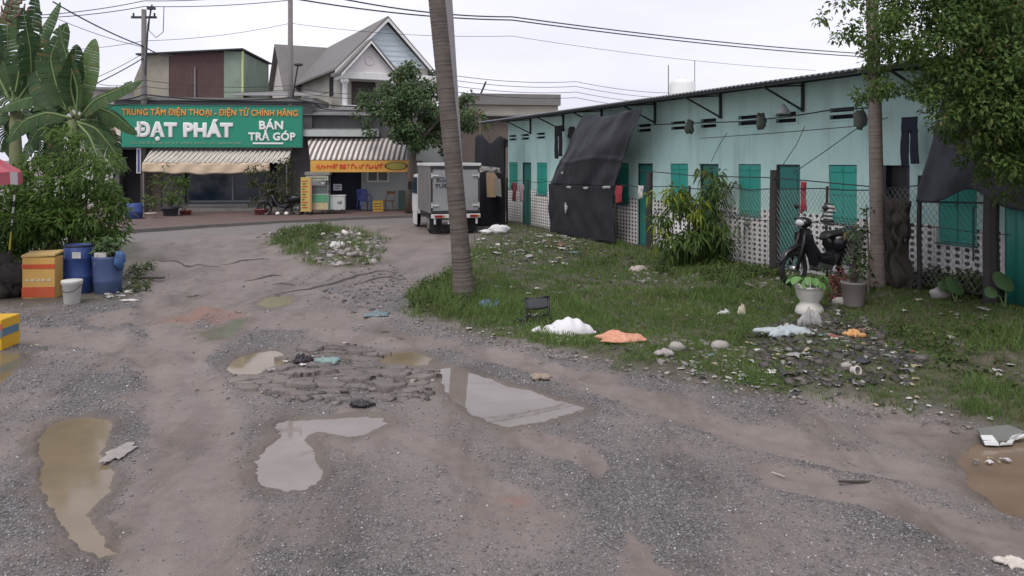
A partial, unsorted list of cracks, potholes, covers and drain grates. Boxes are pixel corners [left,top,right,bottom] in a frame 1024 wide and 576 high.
pothole [217,348,293,377]
pothole [0,350,31,392]
pothole [240,412,399,496]
pothole [25,413,129,564]
pothole [429,364,594,434]
crack [146,258,404,296]
pothole [945,438,1024,521]
